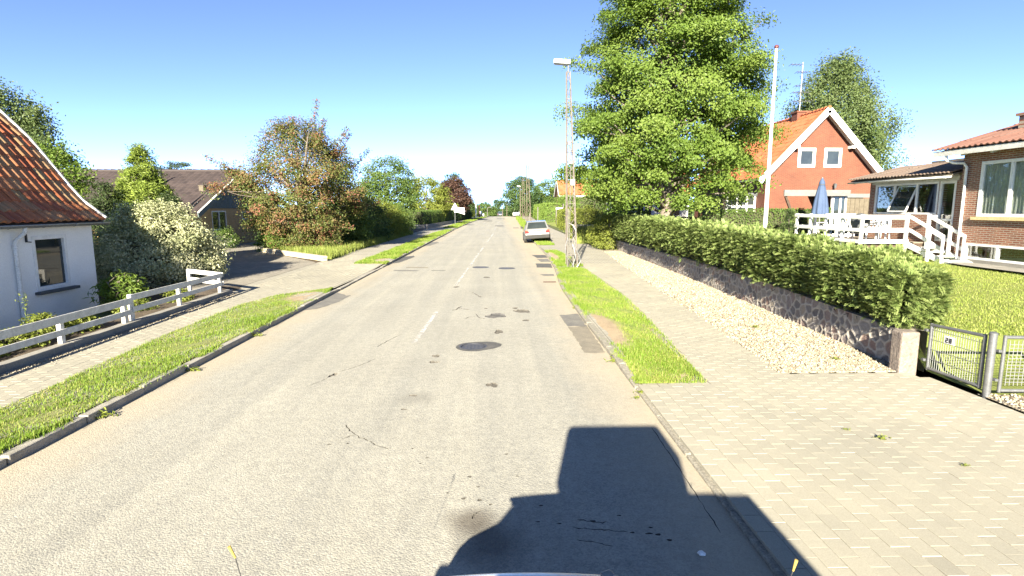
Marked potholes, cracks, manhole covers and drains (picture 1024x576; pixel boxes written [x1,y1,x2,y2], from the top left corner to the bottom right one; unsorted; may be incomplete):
manhole cover [456,342,502,351]
crack [653,430,721,533]
